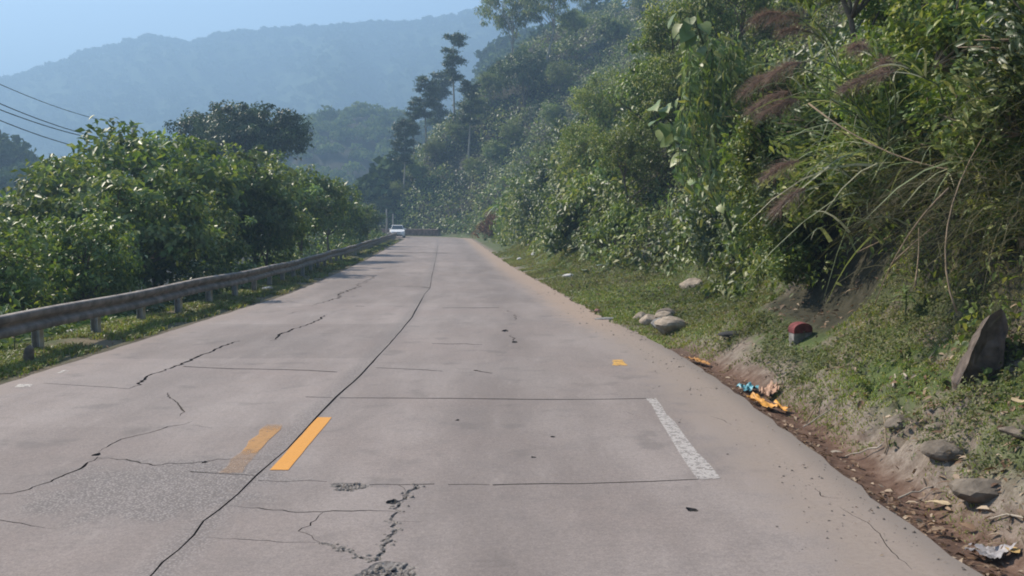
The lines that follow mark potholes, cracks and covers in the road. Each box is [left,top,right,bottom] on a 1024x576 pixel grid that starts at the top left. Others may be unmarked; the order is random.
pothole [330,482,373,492]
crack [815,488,908,565]
crack [198,483,425,563]
crack [271,276,373,341]
pothole [352,561,418,576]
crack [3,341,273,494]
